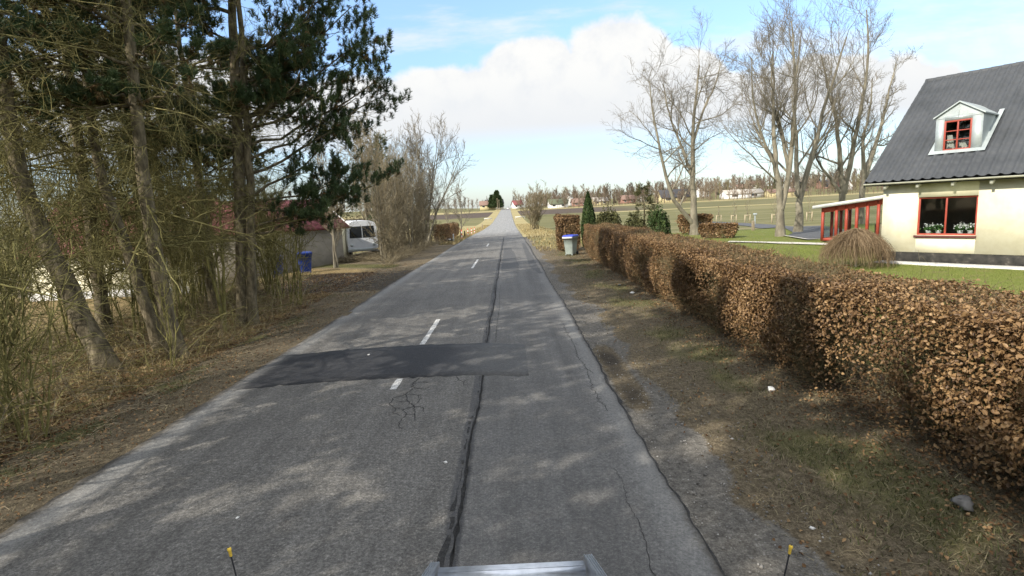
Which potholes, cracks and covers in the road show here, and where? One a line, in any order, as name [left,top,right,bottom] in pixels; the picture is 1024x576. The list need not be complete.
crack [389,378,428,429]
